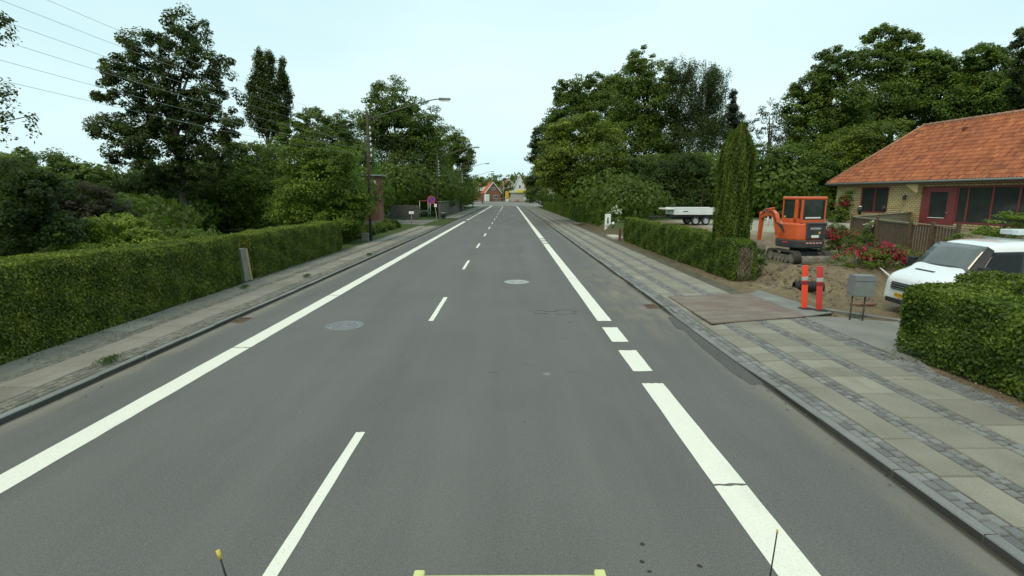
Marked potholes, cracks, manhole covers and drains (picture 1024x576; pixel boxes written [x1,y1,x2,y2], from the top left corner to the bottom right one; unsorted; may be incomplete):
manhole cover [325,321,364,330]
